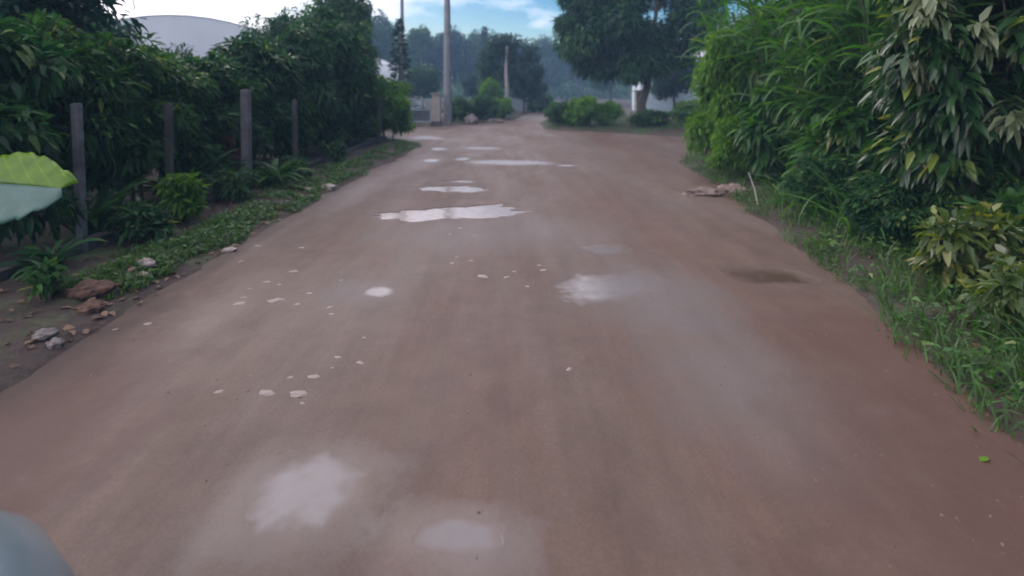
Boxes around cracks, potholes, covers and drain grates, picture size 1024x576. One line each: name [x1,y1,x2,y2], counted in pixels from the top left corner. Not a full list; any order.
pothole [368,203,532,222]
pothole [412,516,505,555]
pothole [720,266,821,286]
